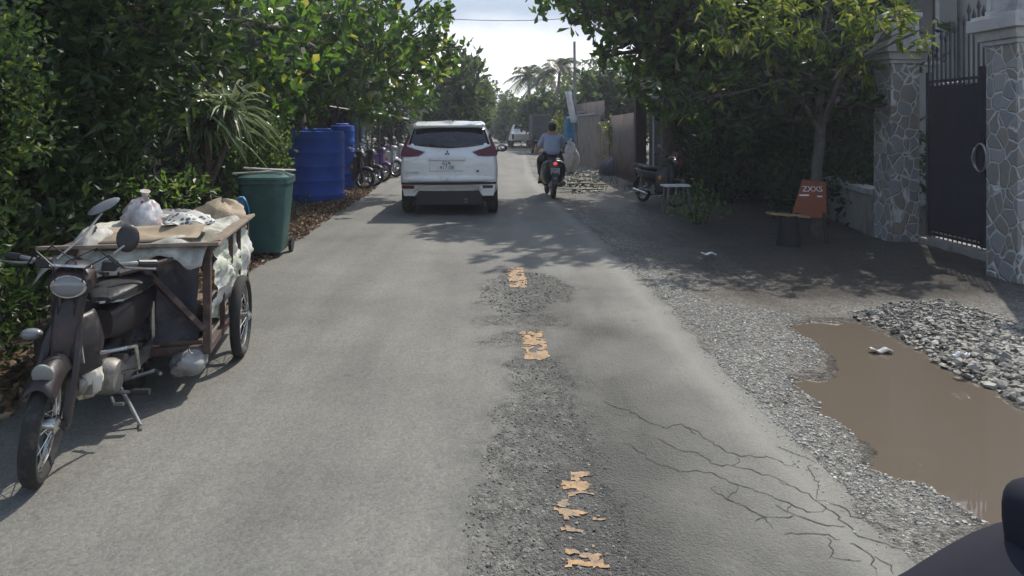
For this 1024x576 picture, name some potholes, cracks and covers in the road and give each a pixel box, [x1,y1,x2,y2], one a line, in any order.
pothole [472,353,659,576]
pothole [782,317,1024,528]
crack [603,400,900,573]
pothole [472,272,576,315]
